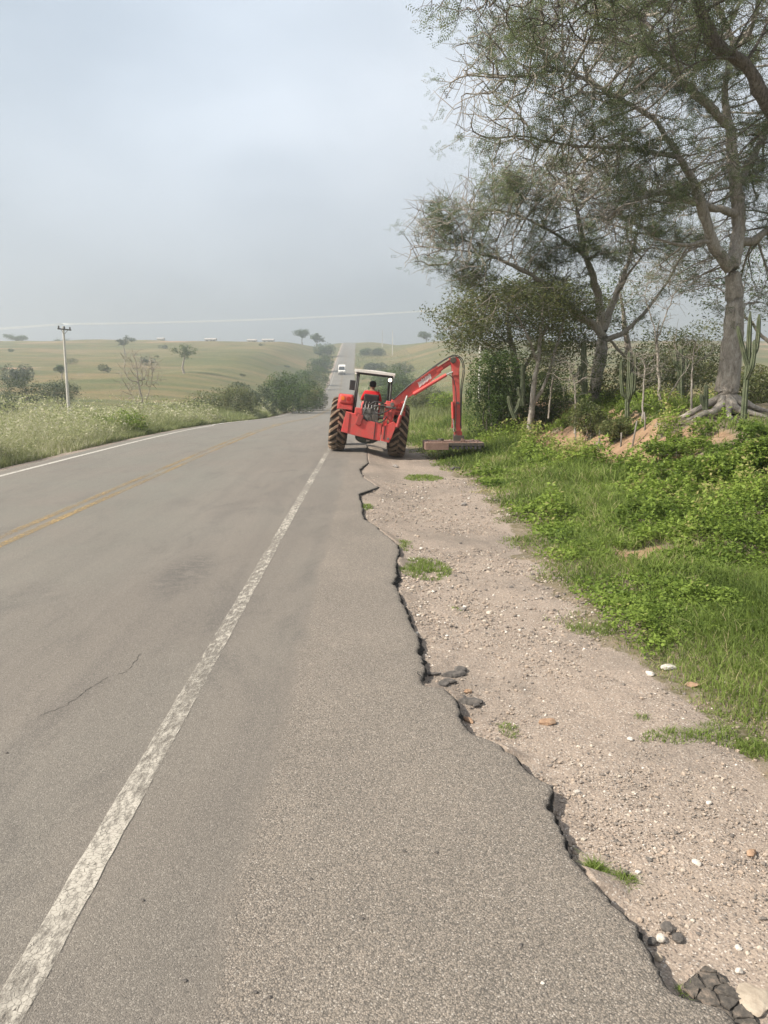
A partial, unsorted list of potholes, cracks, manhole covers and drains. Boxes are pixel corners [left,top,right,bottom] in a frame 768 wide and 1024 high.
crack [600,891,760,1024]
crack [452,696,472,734]
crack [359,461,429,686]
crack [503,750,584,871]
